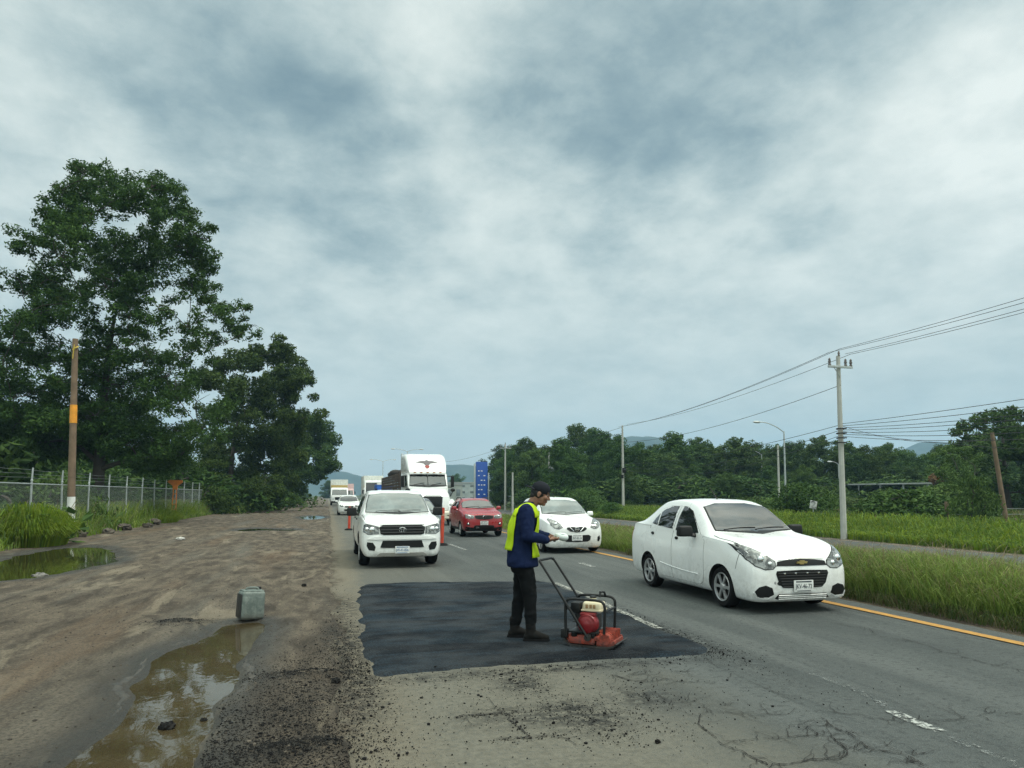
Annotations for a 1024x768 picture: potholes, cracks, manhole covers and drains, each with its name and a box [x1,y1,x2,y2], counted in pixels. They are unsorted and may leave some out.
pothole [64,619,269,768]
crack [612,669,1021,768]
crack [456,698,585,745]
